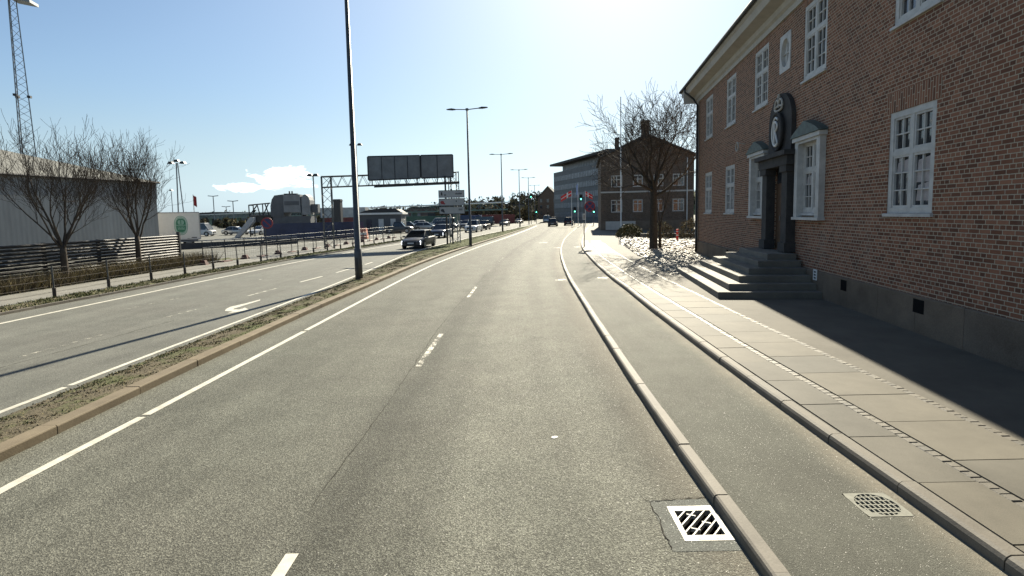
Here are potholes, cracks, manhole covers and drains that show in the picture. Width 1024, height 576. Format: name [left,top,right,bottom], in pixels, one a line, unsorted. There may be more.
crack [645,497,701,549]
